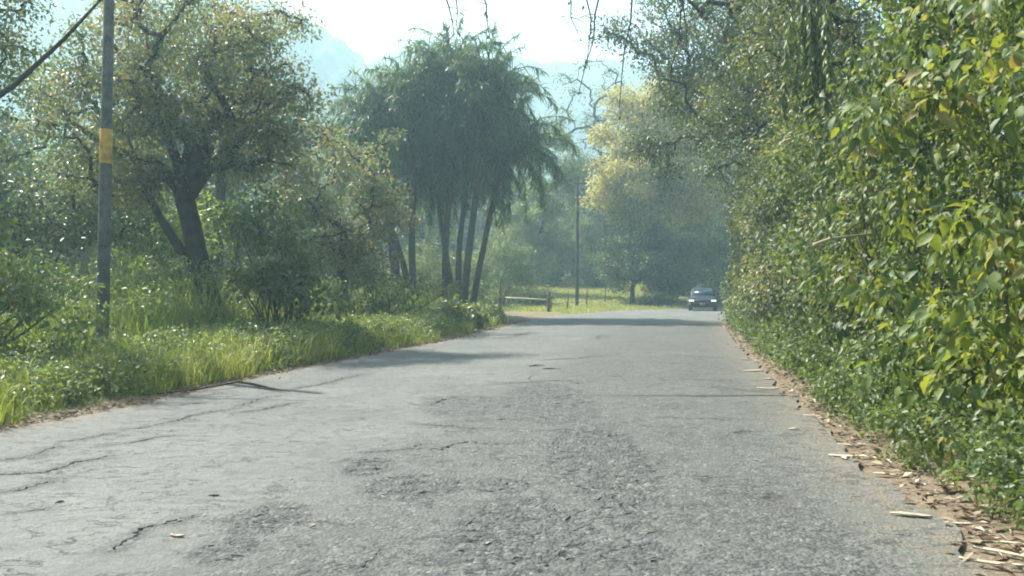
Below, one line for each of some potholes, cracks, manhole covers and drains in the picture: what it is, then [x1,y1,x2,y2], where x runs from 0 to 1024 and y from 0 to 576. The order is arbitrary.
crack [0,374,363,493]
crack [346,356,594,499]
crack [113,515,195,550]
